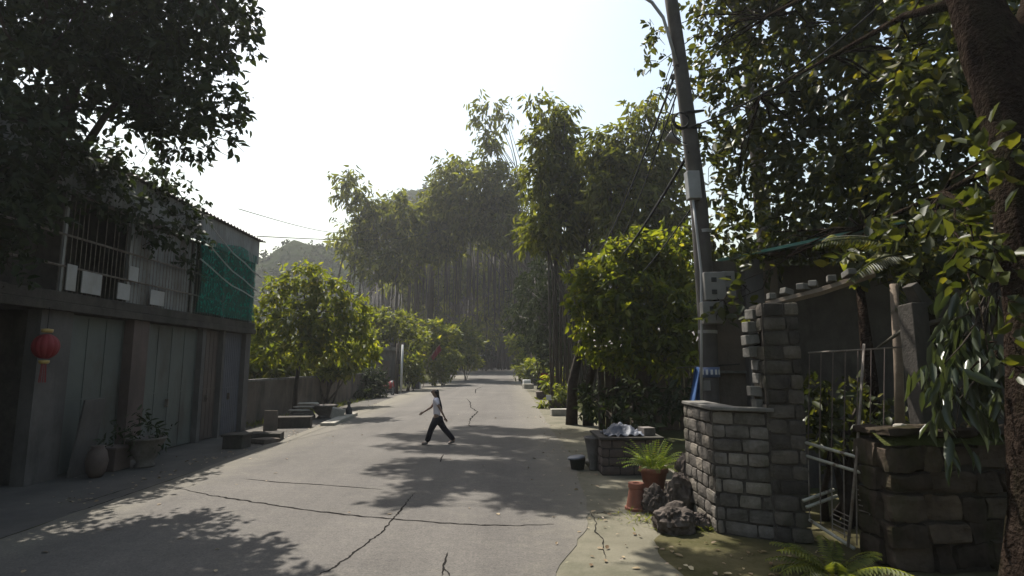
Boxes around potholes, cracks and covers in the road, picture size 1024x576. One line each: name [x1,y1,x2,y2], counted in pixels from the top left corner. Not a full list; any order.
crack [242,478,374,489]
crack [185,489,545,575]
